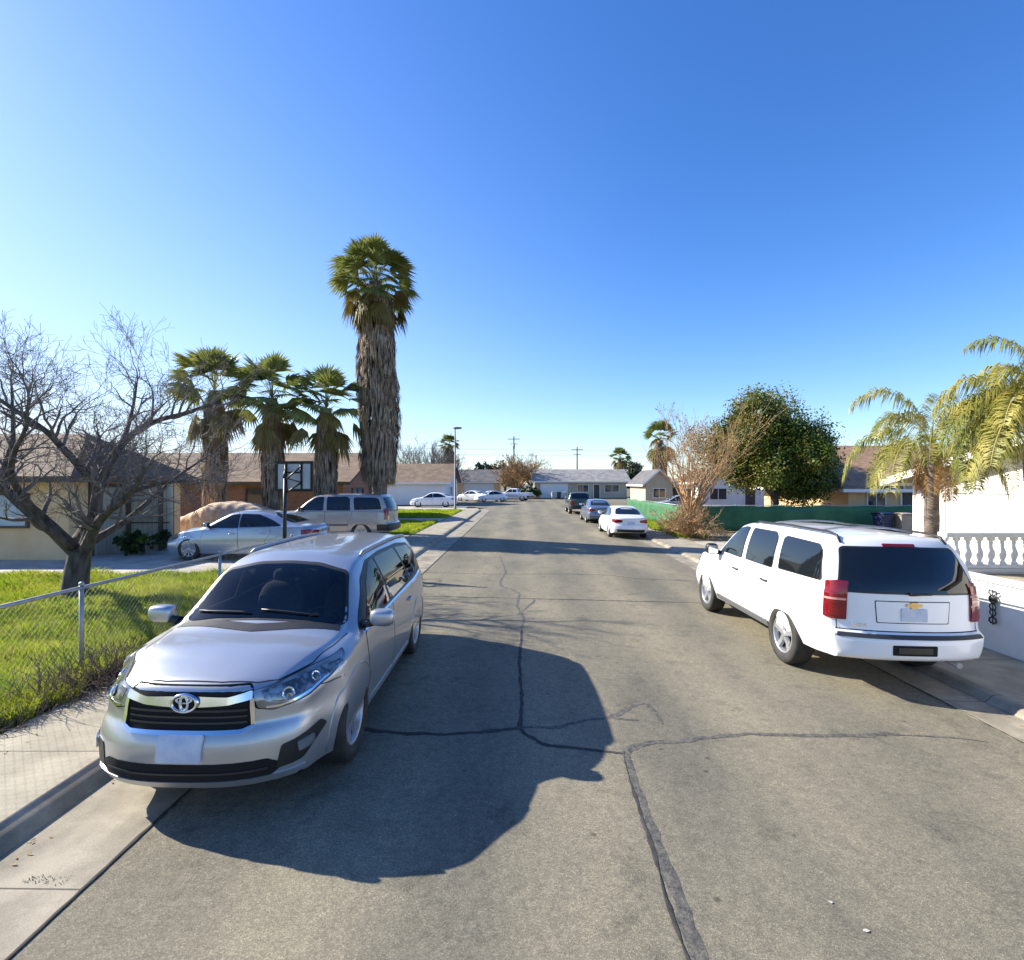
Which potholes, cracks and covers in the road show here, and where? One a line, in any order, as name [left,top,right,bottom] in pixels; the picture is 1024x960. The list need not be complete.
crack [433,555,728,629]
